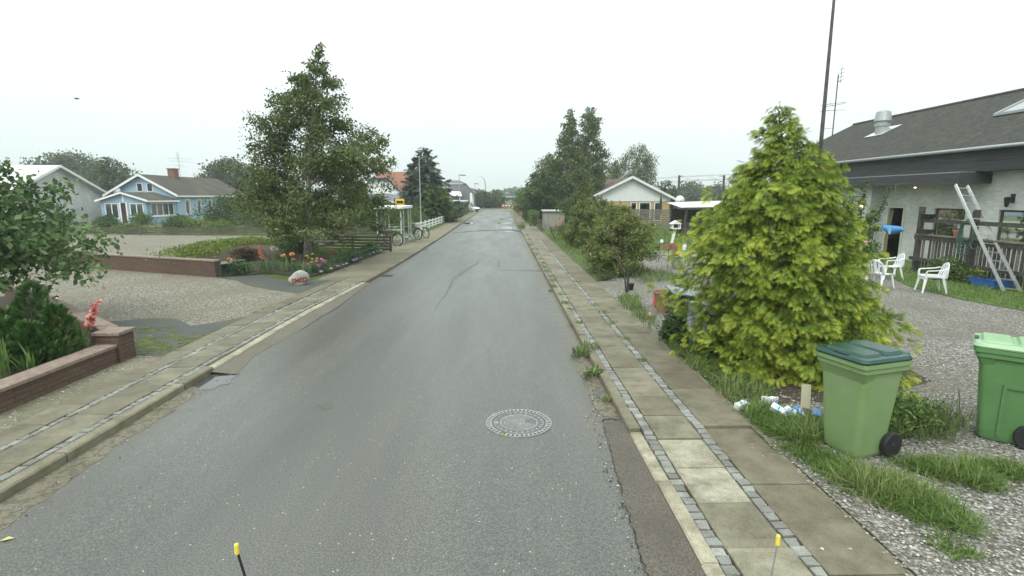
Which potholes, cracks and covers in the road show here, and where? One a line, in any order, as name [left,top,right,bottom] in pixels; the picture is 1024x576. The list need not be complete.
crack [435,259,481,308]
manhole cover [486,409,552,438]
